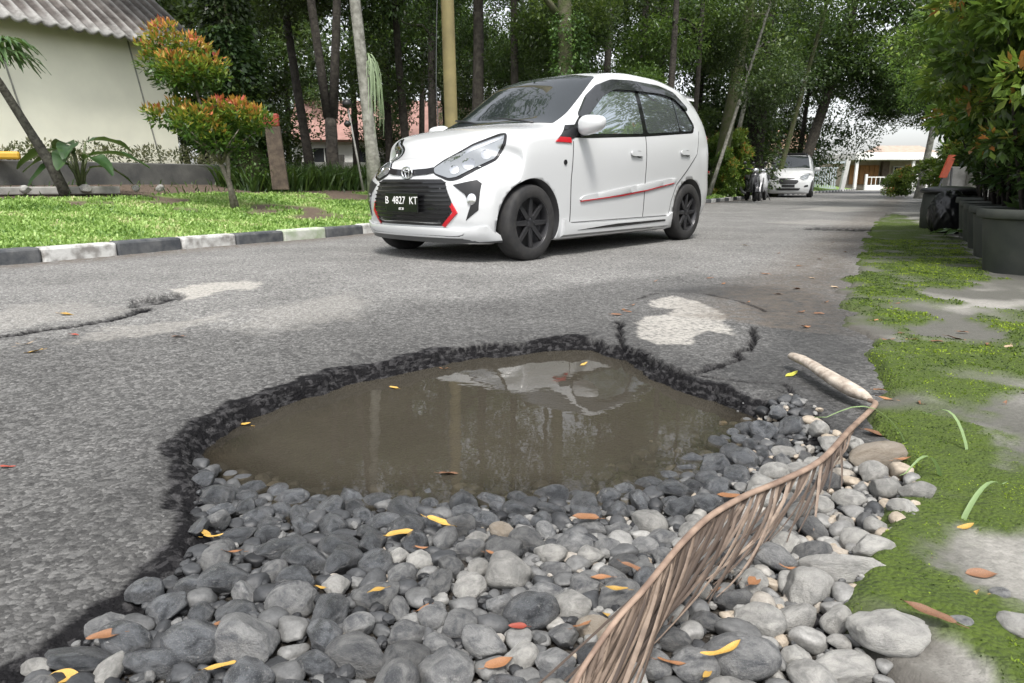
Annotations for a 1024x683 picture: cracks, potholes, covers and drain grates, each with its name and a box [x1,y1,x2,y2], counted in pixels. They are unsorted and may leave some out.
pothole [0,334,879,683]
crack [0,307,157,338]
crack [612,292,834,429]
